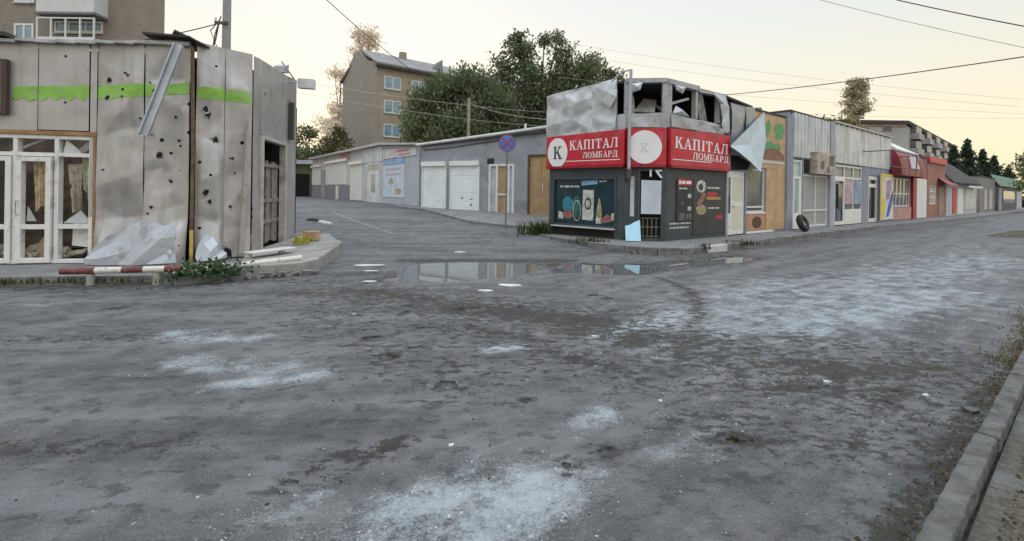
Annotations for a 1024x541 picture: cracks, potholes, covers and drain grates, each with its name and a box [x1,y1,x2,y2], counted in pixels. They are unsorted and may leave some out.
pothole [434,380,457,390]
pothole [382,261,541,281]
pothole [597,445,614,455]
pothole [716,432,754,444]
